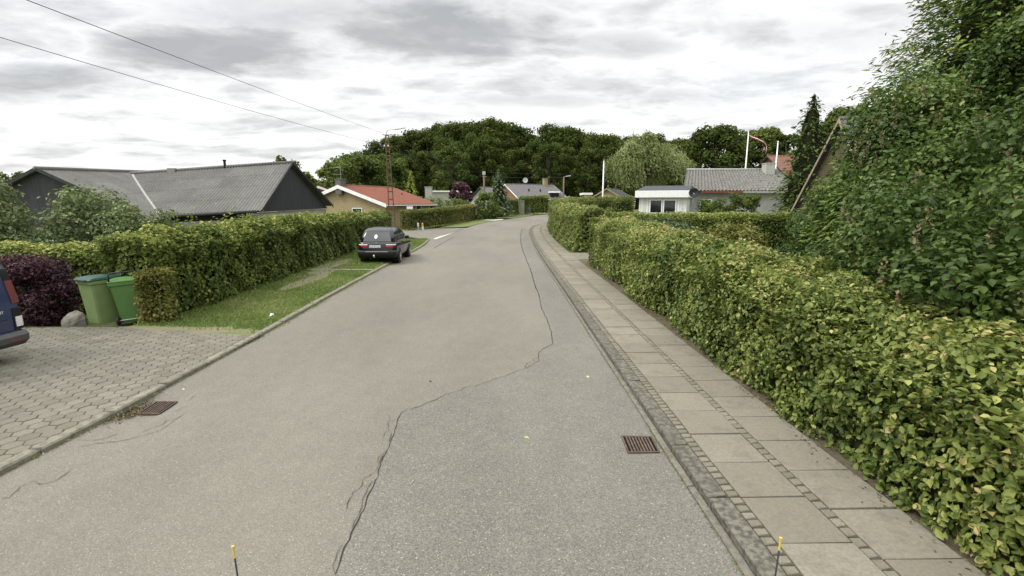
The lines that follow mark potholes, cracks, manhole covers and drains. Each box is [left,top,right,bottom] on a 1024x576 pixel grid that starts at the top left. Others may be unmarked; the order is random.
drain grate [621,435,660,454]
crack [326,231,553,574]
drain grate [138,401,178,416]
